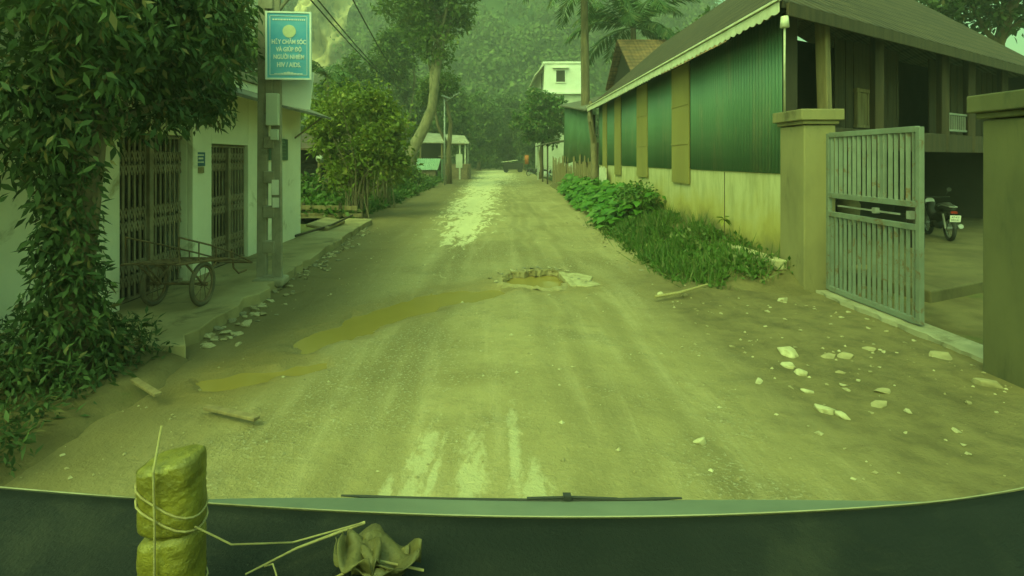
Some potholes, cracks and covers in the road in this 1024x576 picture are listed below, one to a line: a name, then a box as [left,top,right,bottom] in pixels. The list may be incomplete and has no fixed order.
pothole [495,269,568,291]
